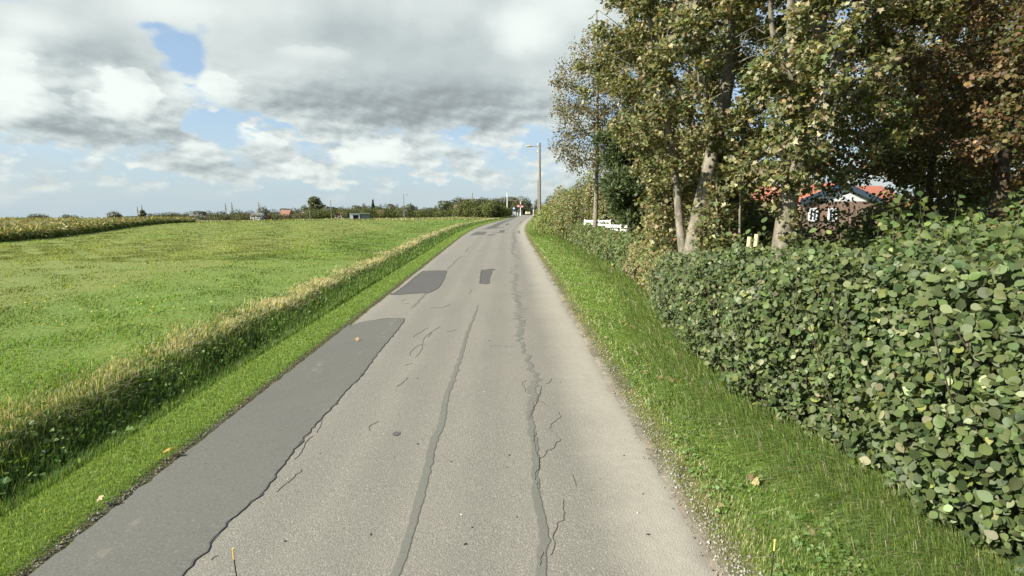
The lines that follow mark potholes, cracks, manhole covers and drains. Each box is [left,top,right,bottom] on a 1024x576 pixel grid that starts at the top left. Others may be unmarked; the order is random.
crack [522,380,561,492]
crack [540,474,576,564]
